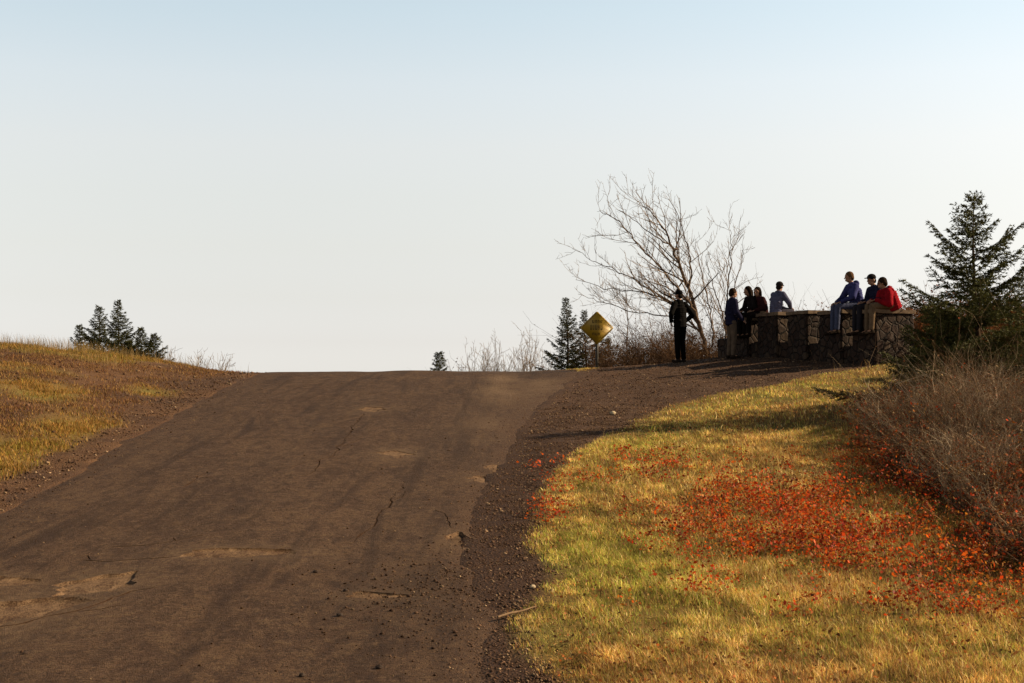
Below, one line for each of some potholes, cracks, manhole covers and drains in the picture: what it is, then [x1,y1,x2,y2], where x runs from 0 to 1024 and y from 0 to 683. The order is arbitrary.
crack [348,481,406,547]
crack [0,587,155,627]
crack [293,413,365,478]
